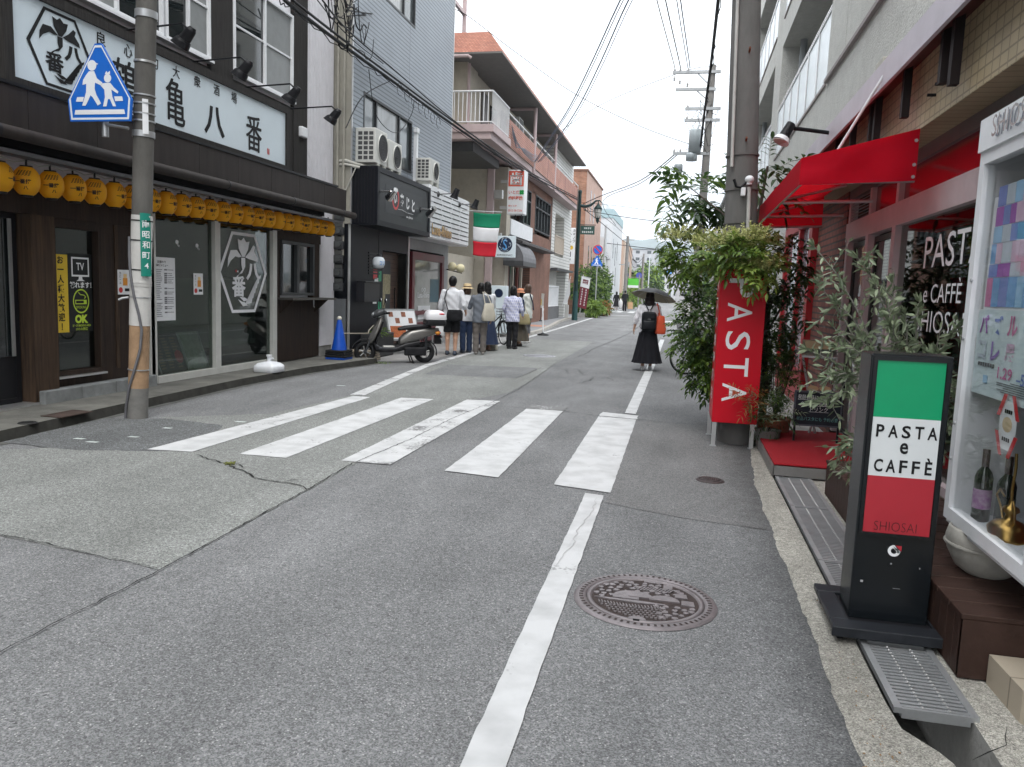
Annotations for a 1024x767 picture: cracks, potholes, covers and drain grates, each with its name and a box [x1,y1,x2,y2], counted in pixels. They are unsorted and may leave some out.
manhole cover [696,476,725,484]
drain grate [790,505,846,563]
crack [197,454,311,490]
manhole cover [574,574,718,631]
crack [549,500,597,572]
drain grate [775,476,832,509]
drain grate [858,639,980,728]
